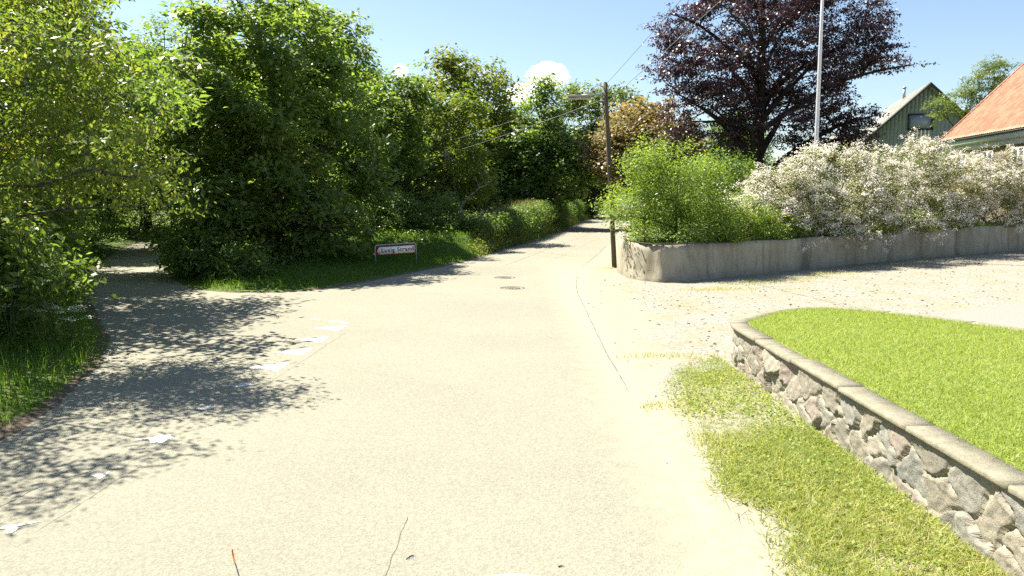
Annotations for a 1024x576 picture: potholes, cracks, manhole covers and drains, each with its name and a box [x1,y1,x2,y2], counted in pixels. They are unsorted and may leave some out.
crack [385,517,408,576]
